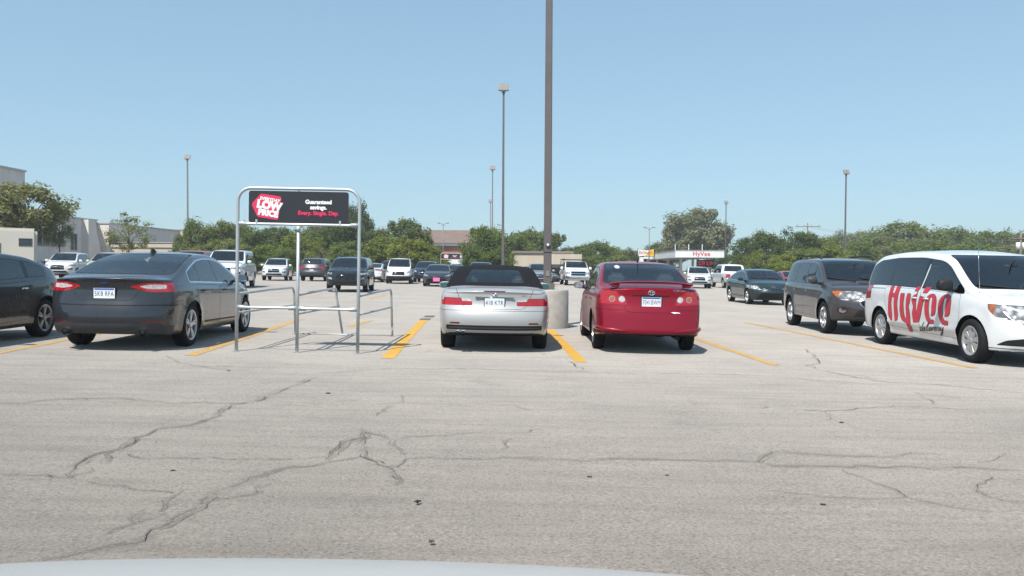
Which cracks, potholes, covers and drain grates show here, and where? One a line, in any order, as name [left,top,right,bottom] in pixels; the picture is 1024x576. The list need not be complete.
crack [340,349,1002,418]
crack [1,376,543,559]
crack [407,450,1021,510]
